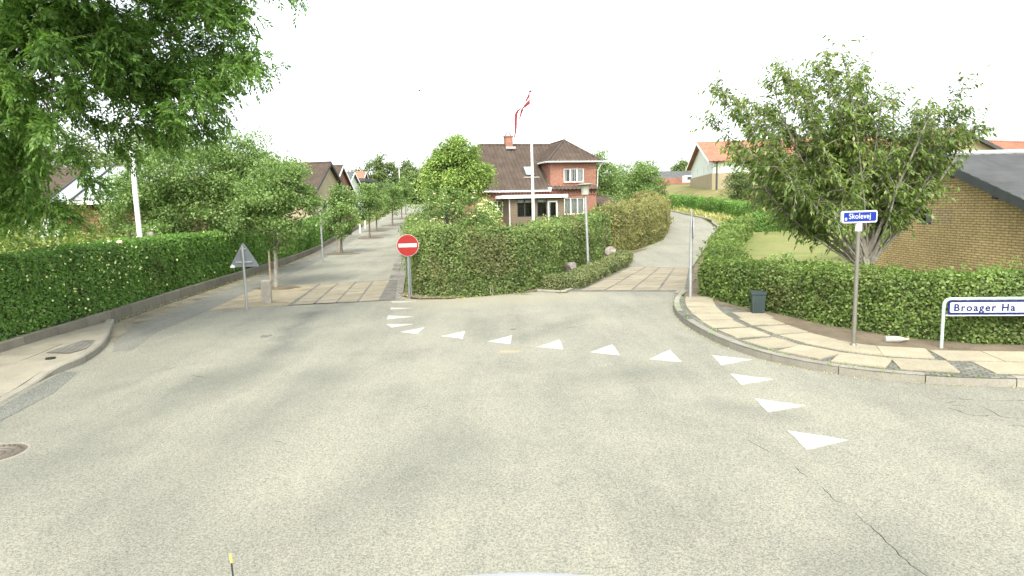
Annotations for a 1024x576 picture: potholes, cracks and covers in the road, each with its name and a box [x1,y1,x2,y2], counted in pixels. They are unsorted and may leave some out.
manhole cover [0,442,31,461]
crack [750,441,927,576]
crack [922,395,1024,426]
